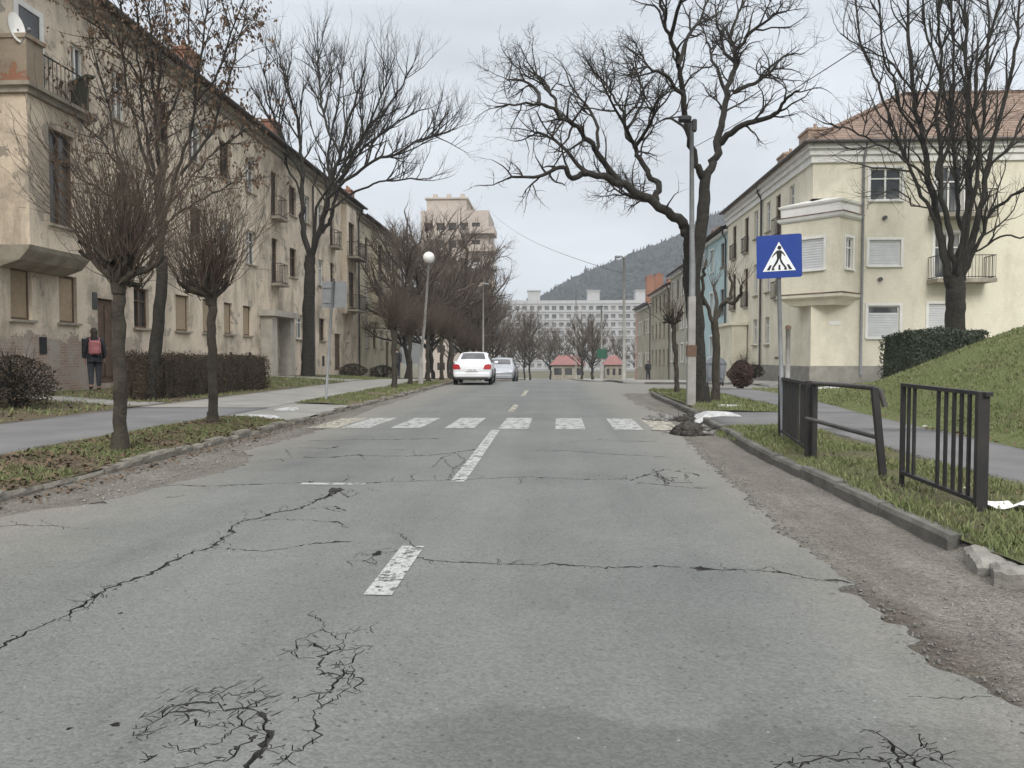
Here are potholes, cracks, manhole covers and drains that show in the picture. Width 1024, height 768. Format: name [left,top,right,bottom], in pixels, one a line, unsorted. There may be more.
crack [573,439,702,489]
crack [0,474,850,649]
crack [770,730,955,768]
crack [276,438,476,478]
crack [132,614,373,768]
